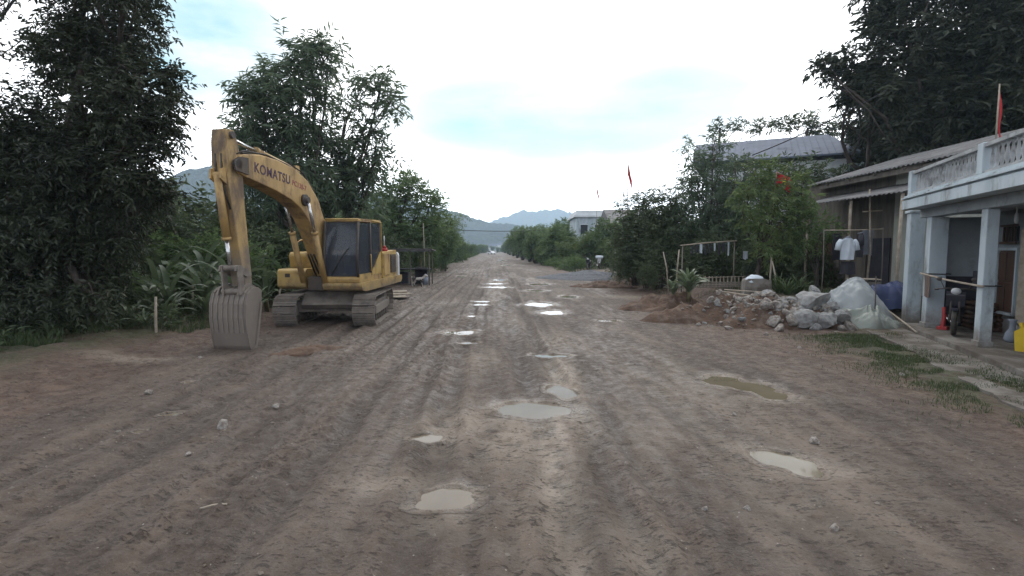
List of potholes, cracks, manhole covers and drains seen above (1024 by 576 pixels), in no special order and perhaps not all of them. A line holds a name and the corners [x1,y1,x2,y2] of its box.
pothole [477,398,592,423]
pothole [435,329,483,337]
pothole [737,443,837,481]
pothole [524,352,582,361]
pothole [690,372,801,402]
pothole [401,430,453,446]
pothole [539,382,587,402]
pothole [397,479,491,516]
